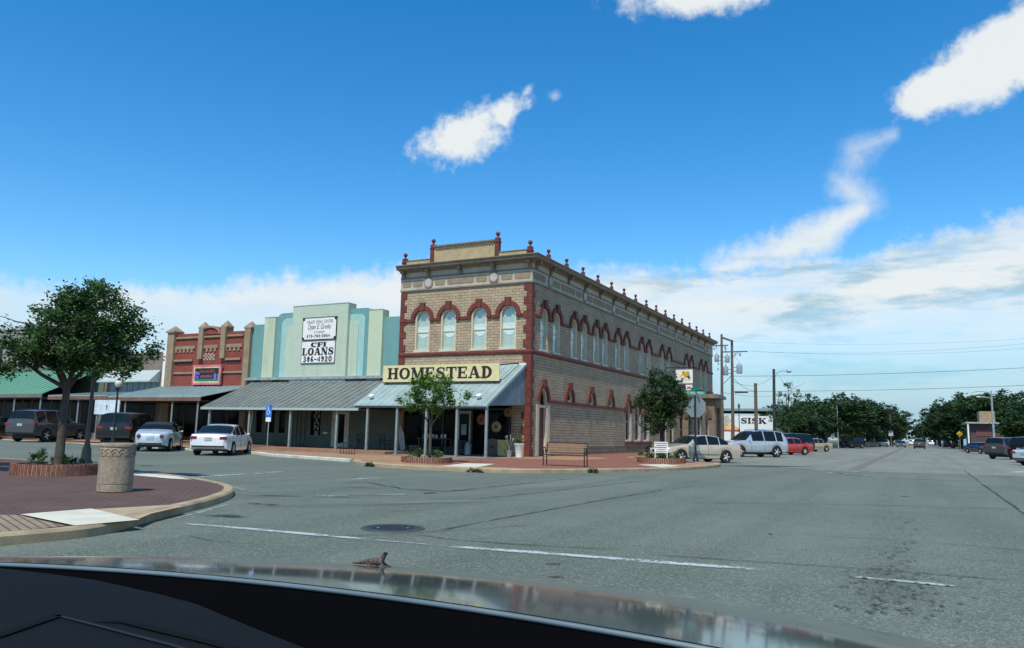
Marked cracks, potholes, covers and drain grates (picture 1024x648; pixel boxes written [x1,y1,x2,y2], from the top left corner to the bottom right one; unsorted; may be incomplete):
manhole cover [361,524,425,533]
